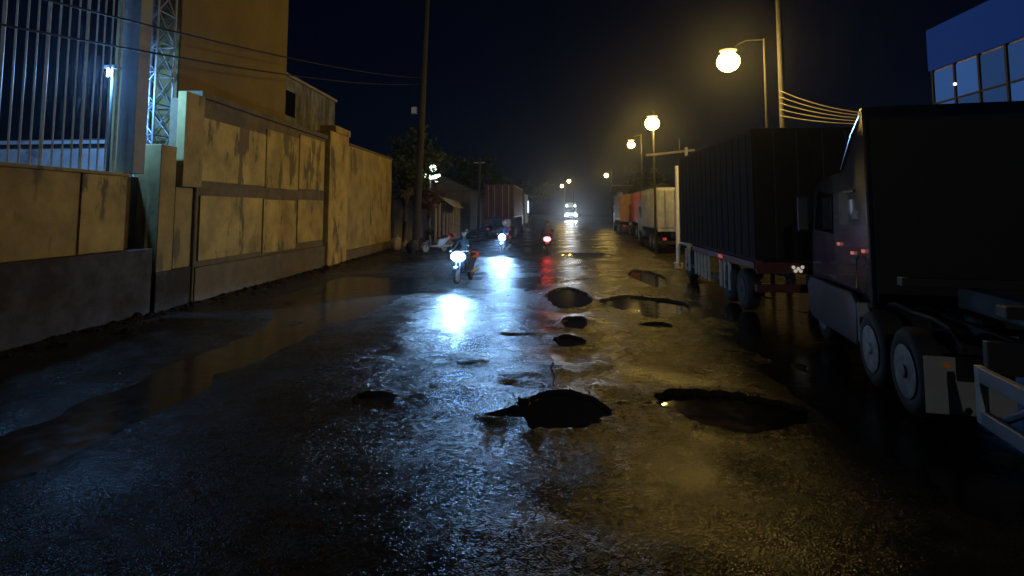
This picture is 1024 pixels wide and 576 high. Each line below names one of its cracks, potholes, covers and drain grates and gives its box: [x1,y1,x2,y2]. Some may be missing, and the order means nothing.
pothole [541,287,594,309]
pothole [552,316,598,329]
pothole [541,331,595,349]
pothole [590,294,691,318]
pothole [350,391,397,410]
pothole [474,383,636,433]
pothole [627,269,668,288]
pothole [631,384,829,441]
